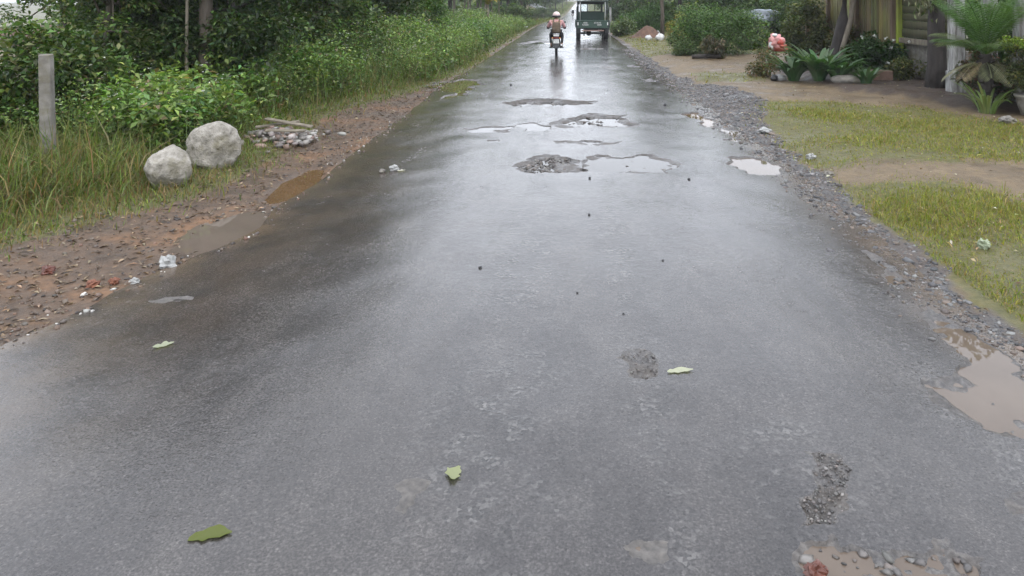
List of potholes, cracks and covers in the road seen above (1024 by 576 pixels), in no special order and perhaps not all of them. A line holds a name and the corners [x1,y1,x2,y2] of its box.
pothole [726,156,785,176]
pothole [580,154,681,174]
pothole [501,98,598,107]
pothole [615,348,659,379]
pothole [797,451,853,528]
pothole [791,533,985,576]
pothole [549,113,640,128]
pothole [681,111,718,127]
pothole [515,122,551,131]
pothole [915,306,1024,439]
pothole [511,154,589,174]
